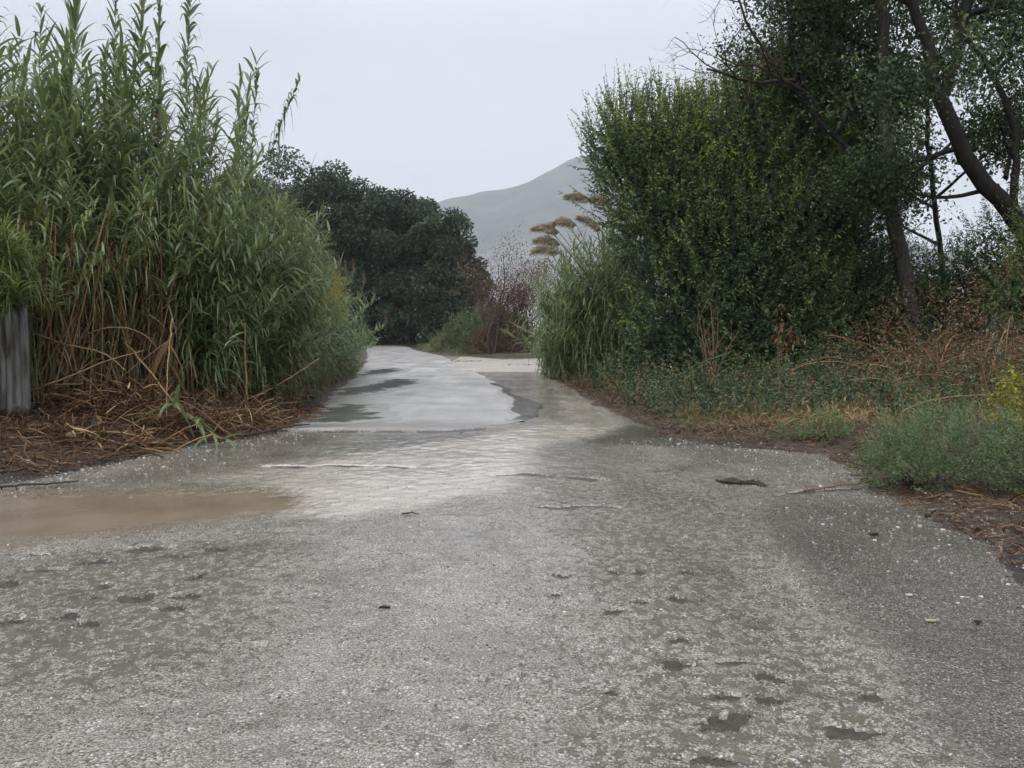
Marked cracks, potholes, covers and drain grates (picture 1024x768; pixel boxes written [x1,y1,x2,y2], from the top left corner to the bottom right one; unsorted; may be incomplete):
pothole [824,726,886,741]
pothole [698,713,748,732]
pothole [657,661,692,671]
pothole [753,696,787,706]
